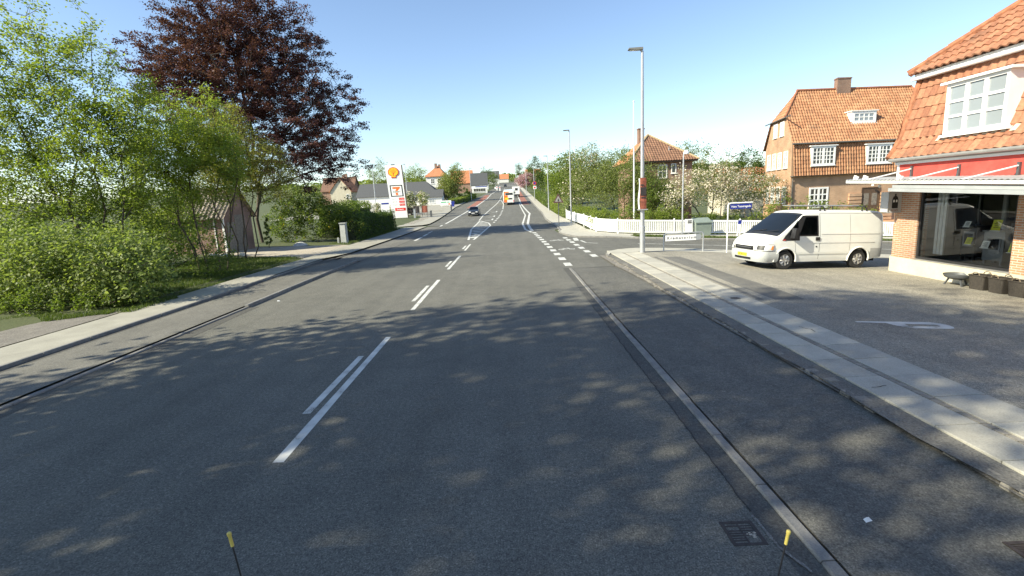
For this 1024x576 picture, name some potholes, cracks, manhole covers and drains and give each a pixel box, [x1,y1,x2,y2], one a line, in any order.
drain grate [719,520,769,546]
